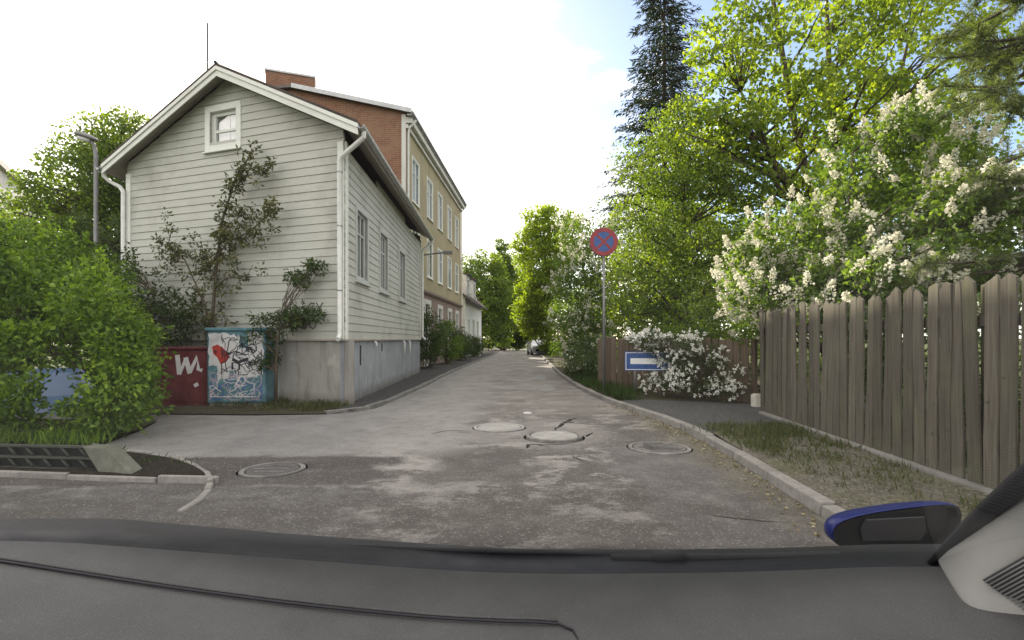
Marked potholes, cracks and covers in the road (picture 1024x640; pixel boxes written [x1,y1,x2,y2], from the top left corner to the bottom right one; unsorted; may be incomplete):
crack [702,513,790,523]
crack [508,418,592,461]
manhole cover [526,430,583,444]
manhole cover [628,441,692,455]
manhole cover [474,423,525,433]
manhole cover [238,461,306,478]
